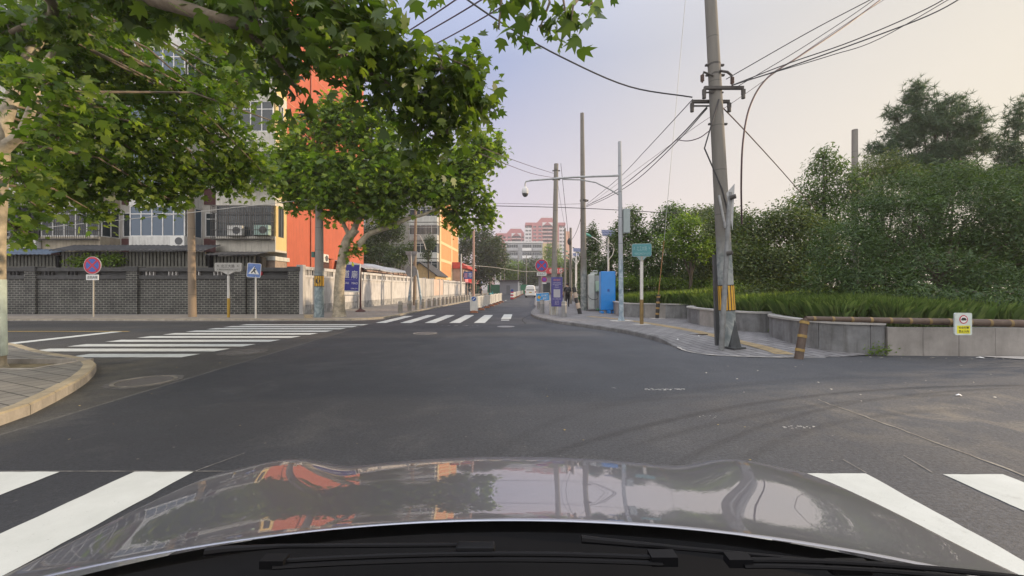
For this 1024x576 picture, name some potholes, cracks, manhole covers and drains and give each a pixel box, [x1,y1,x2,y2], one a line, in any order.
manhole cover [100,374,185,389]
